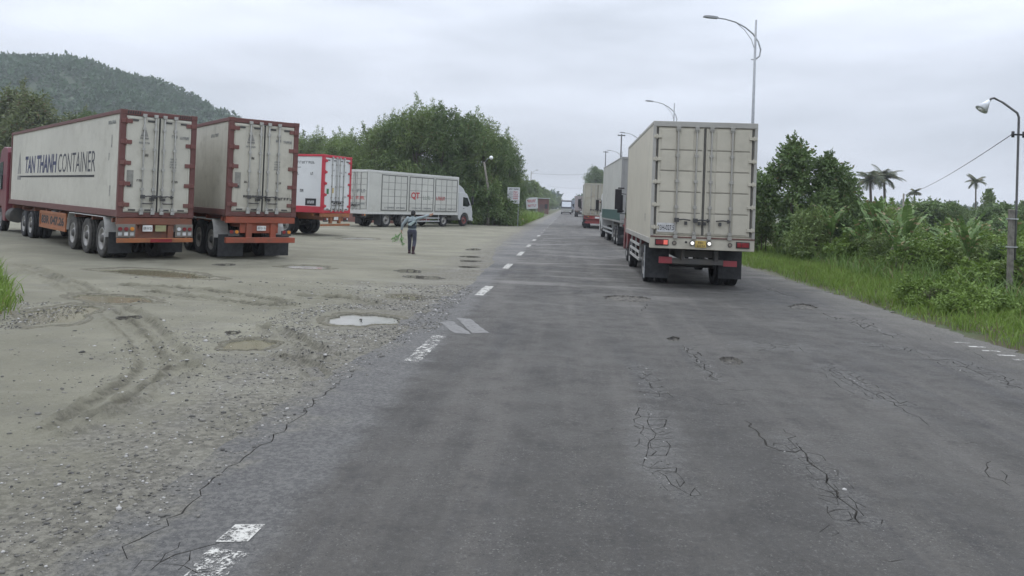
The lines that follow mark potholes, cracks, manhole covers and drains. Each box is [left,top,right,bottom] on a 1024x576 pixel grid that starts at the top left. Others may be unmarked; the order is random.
crack [744,420,899,562]
pothole [316,311,408,328]
crack [823,313,1022,389]
pothole [214,336,285,351]
crack [122,376,352,573]
pothole [719,357,744,365]
pothole [82,267,233,280]
crack [818,361,927,424]
pothole [59,292,167,305]
crack [629,366,701,496]
